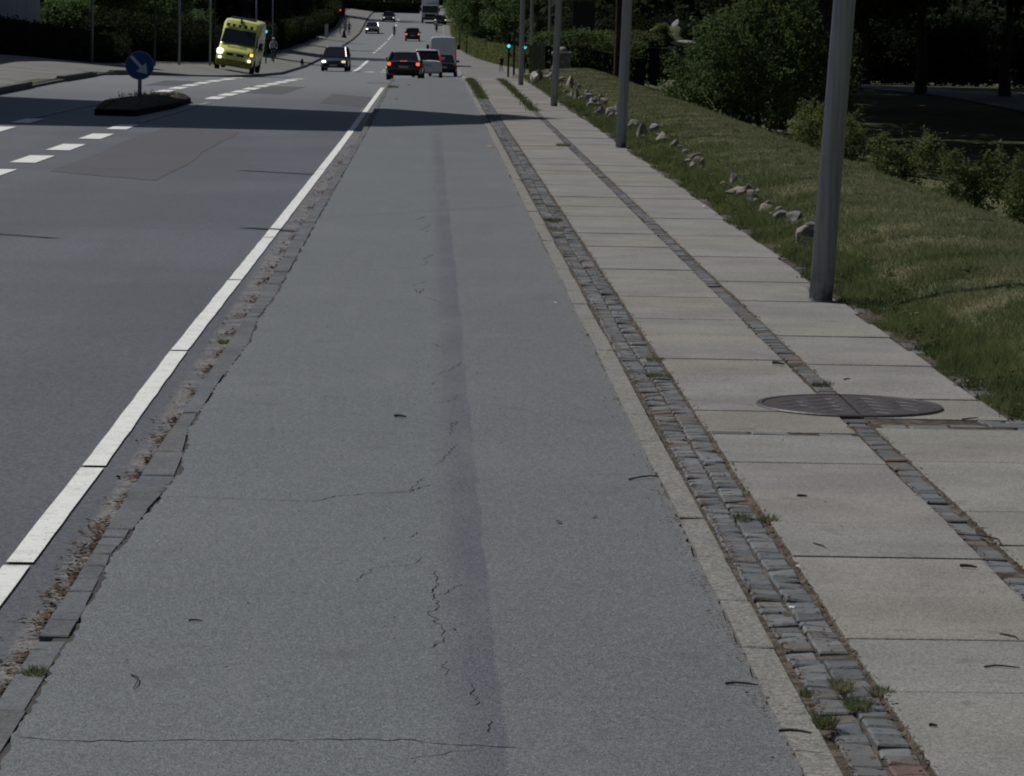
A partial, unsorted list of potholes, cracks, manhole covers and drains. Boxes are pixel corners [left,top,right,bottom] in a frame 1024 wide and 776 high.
crack [0,85,515,770]
manhole cover [756,394,944,419]
